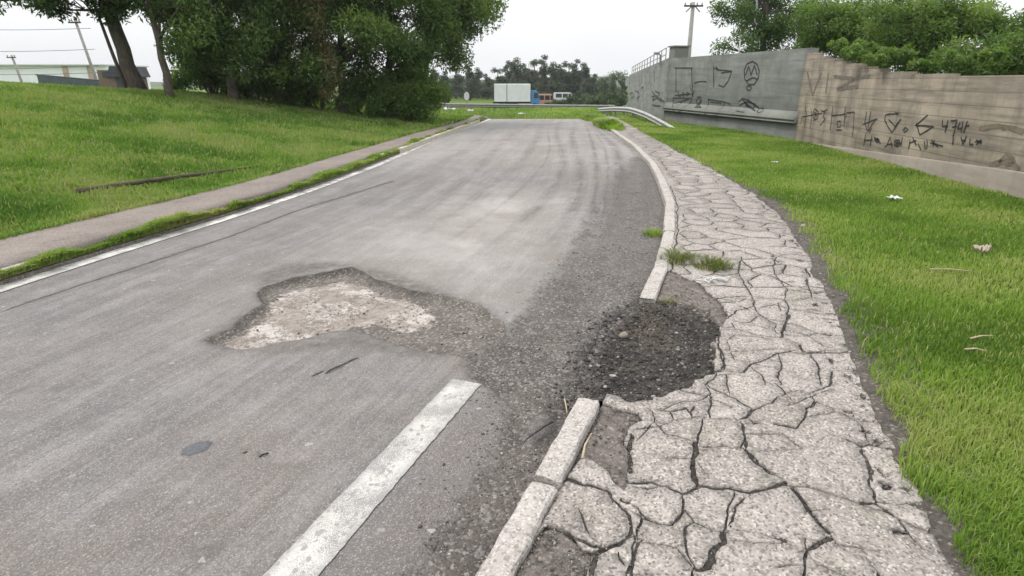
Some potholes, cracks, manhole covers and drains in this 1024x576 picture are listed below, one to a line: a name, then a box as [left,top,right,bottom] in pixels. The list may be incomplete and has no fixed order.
pothole [204,267,506,356]
crack [563,136,918,576]
pothole [566,302,720,408]
